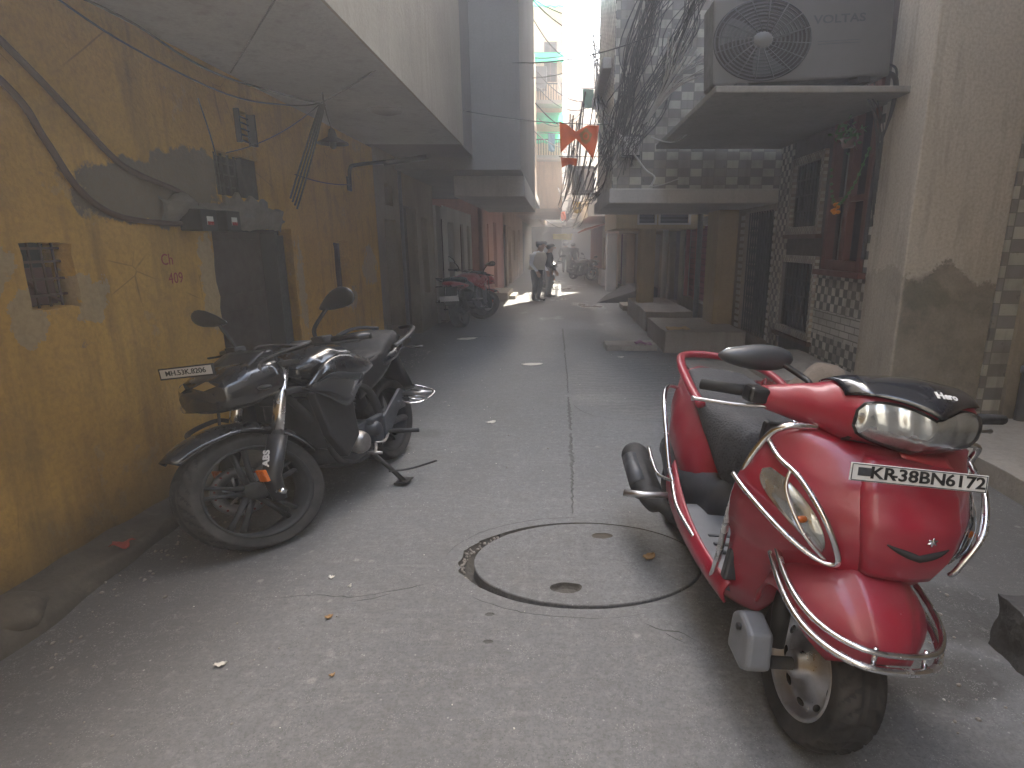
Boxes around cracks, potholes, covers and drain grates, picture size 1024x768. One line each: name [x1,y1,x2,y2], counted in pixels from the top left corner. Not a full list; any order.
crack [284,585,419,602]
manhole cover [465,523,702,609]
